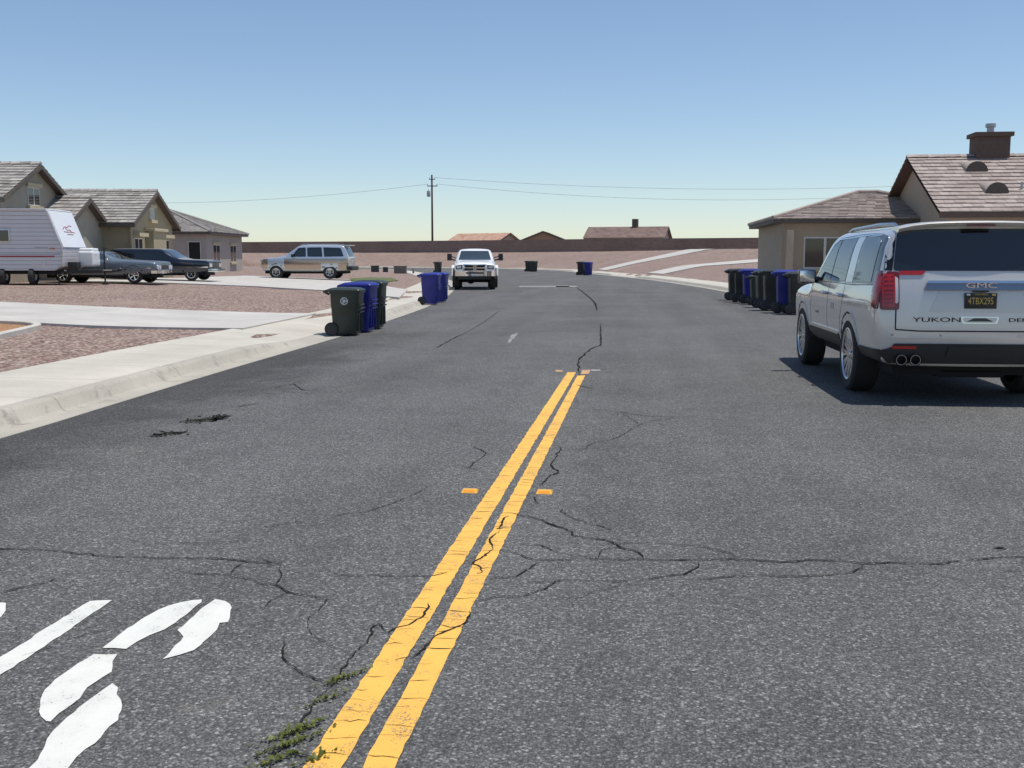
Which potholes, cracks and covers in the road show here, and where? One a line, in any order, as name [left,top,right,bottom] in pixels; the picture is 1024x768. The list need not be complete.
pothole [179,415,230,424]
crack [576,408,684,451]
crack [547,287,602,389]
crack [0,411,557,768]
crack [530,446,562,503]
crack [472,508,1024,602]
